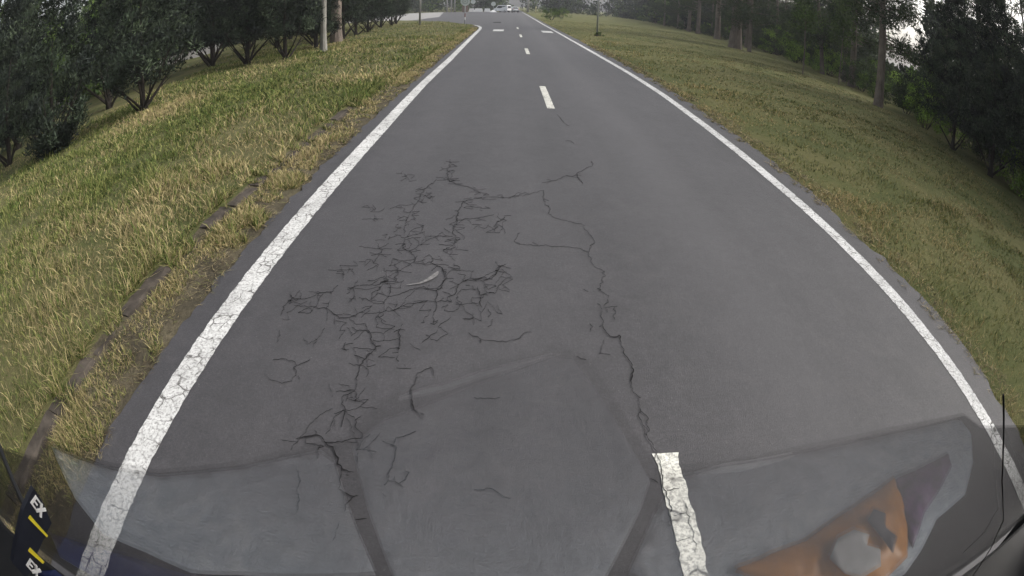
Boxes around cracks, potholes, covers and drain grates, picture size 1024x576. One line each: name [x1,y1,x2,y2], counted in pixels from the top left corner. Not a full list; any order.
crack [281,159,527,520]
crack [514,173,697,567]
